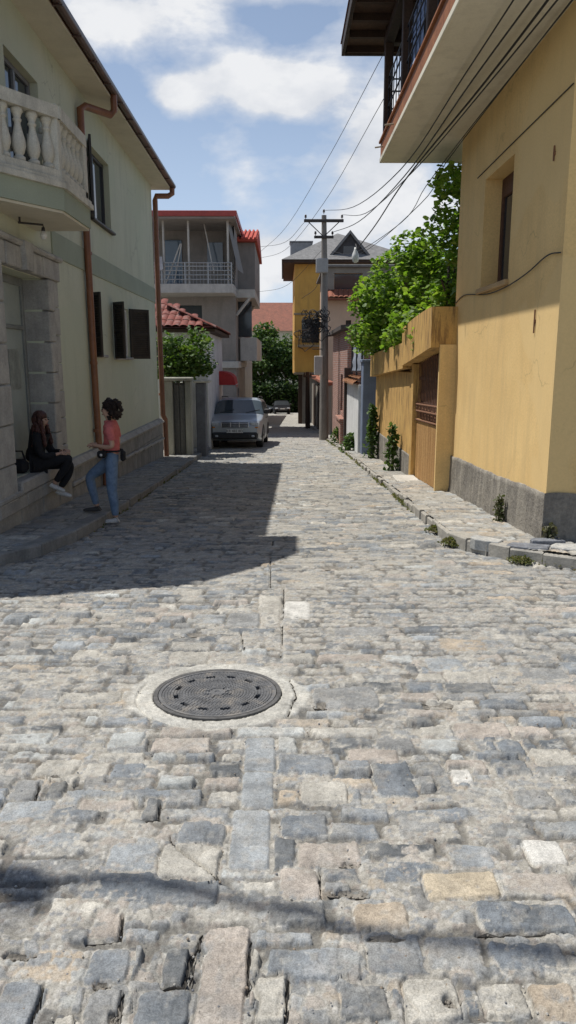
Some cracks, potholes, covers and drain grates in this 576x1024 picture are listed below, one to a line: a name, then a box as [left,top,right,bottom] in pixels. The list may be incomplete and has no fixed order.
manhole cover [153,669,281,721]
